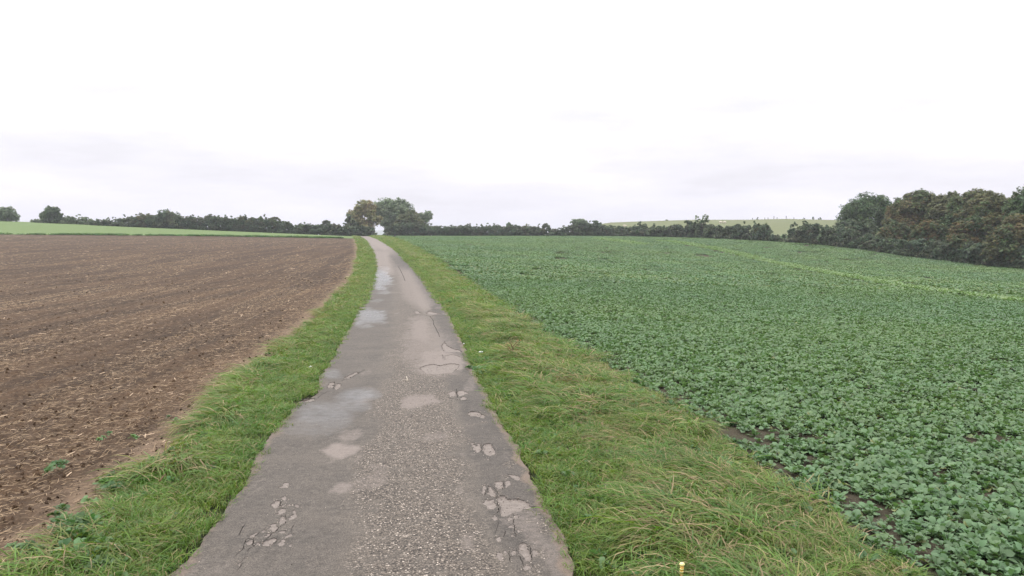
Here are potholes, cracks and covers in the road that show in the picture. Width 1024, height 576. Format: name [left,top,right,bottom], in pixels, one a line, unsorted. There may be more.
crack [482,474,539,570]
pothole [415,355,461,374]
pothole [482,443,496,456]
